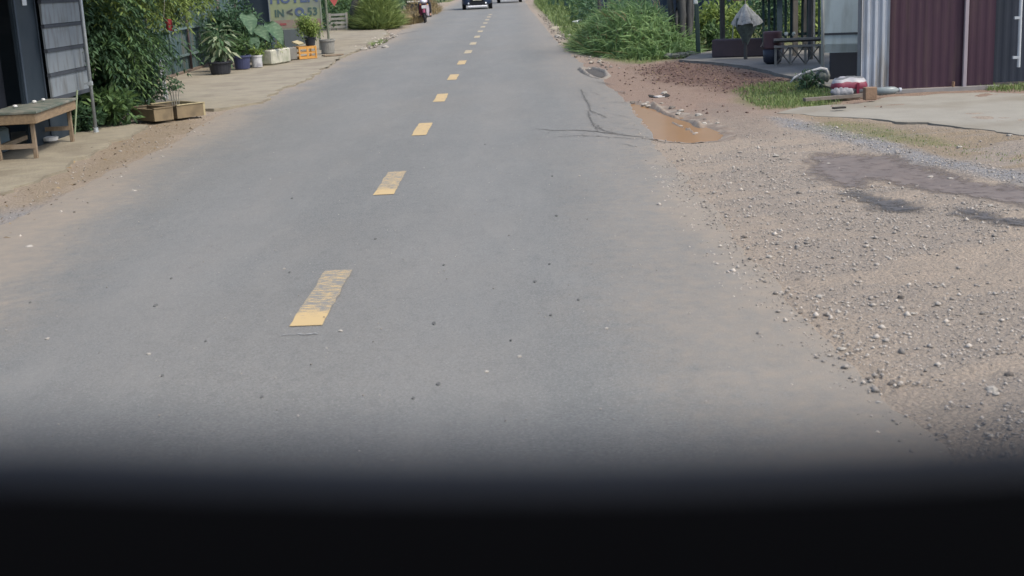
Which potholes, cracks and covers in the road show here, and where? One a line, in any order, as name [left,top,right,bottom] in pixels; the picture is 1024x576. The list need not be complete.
crack [537,81,645,147]
